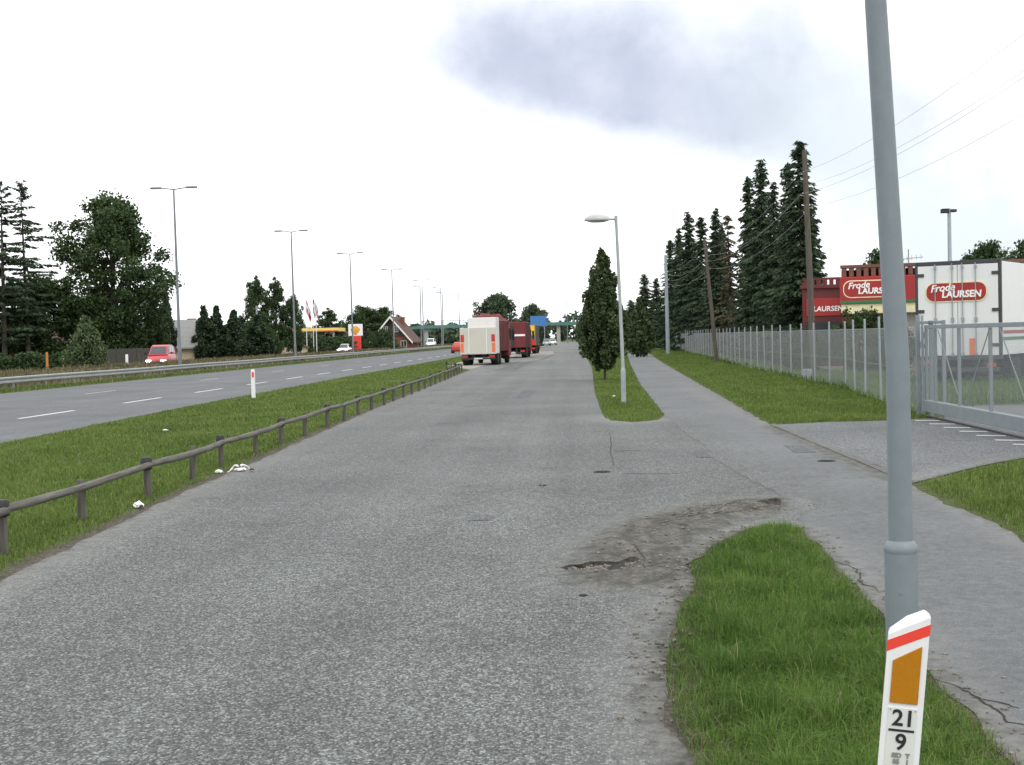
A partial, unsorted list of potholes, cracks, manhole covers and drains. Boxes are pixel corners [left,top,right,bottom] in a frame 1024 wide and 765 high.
pothole [560,557,640,570]
crack [937,680,1024,725]
